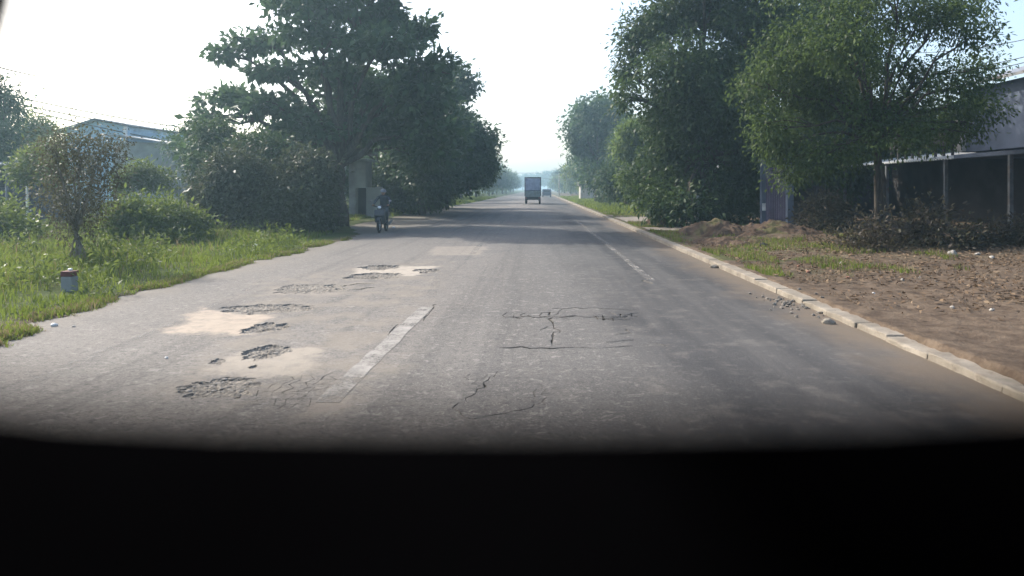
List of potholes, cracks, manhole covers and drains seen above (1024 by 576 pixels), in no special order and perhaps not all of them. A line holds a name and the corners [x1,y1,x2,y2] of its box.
crack [502,307,639,349]
pothole [274,284,349,294]
pothole [241,344,293,361]
pothole [174,376,264,400]
pothole [220,304,316,315]
crack [454,372,551,407]
pothole [239,322,291,334]
